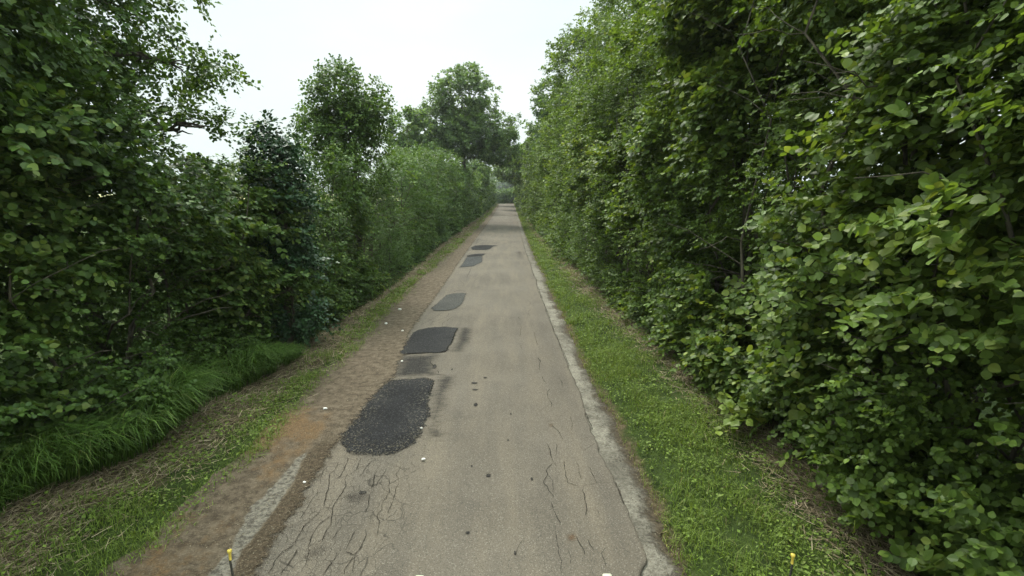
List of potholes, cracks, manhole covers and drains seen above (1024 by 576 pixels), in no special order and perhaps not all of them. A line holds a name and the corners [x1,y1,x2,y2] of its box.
crack [268,459,405,574]
crack [543,416,624,565]
